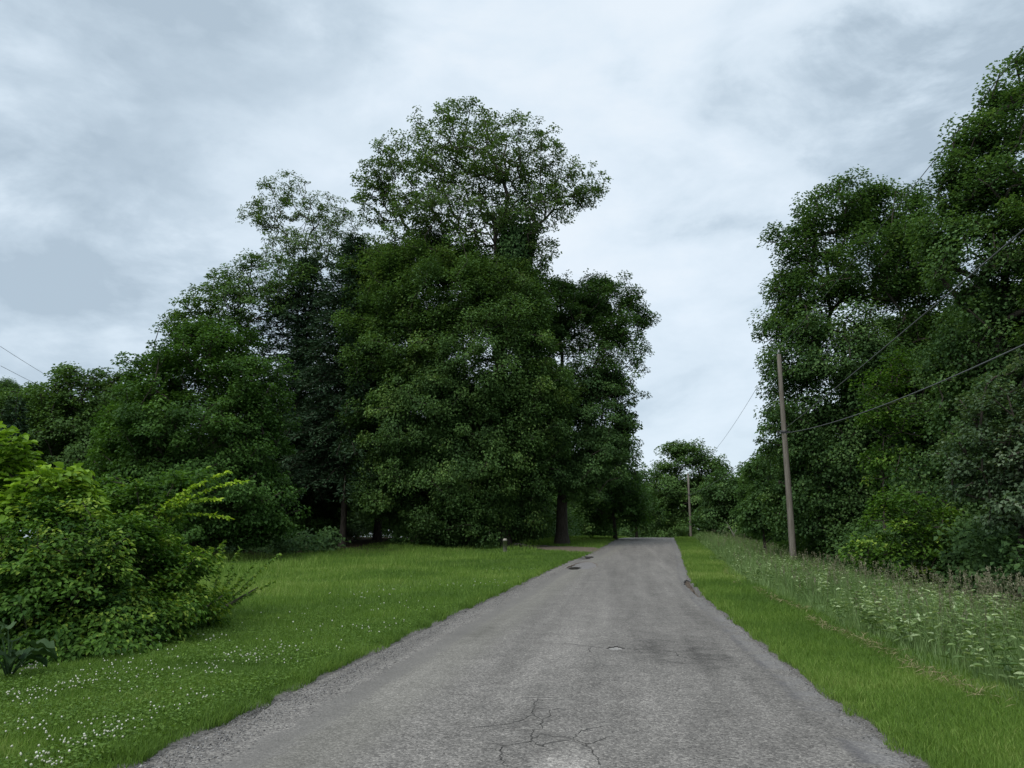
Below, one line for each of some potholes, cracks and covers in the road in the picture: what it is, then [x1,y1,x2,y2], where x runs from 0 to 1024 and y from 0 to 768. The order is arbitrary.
pothole [567,562,597,570]
crack [474,697,606,766]
